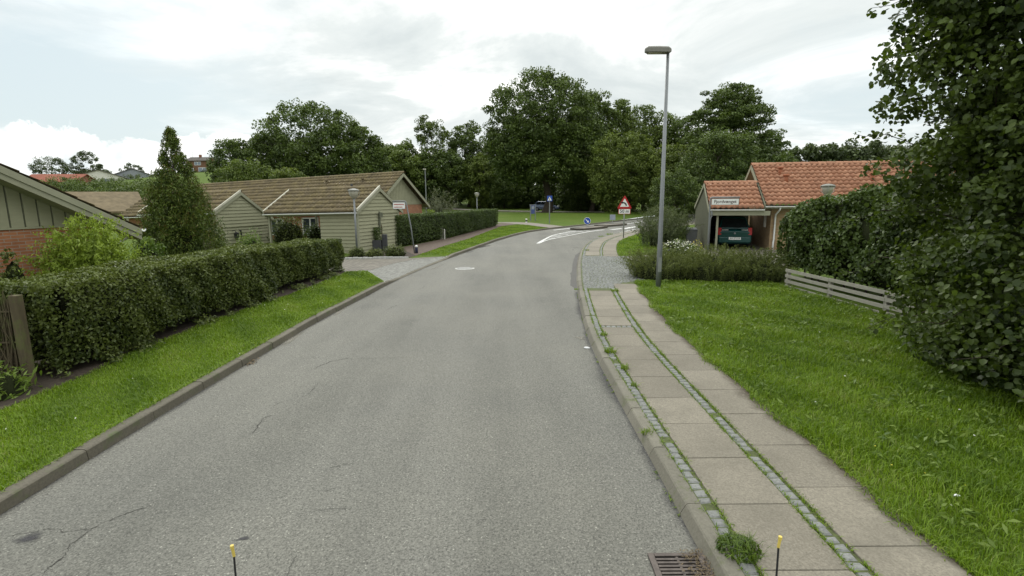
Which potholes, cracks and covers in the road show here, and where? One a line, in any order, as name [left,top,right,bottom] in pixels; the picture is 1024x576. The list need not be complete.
drain grate [647,552,715,576]
crack [15,507,145,573]
